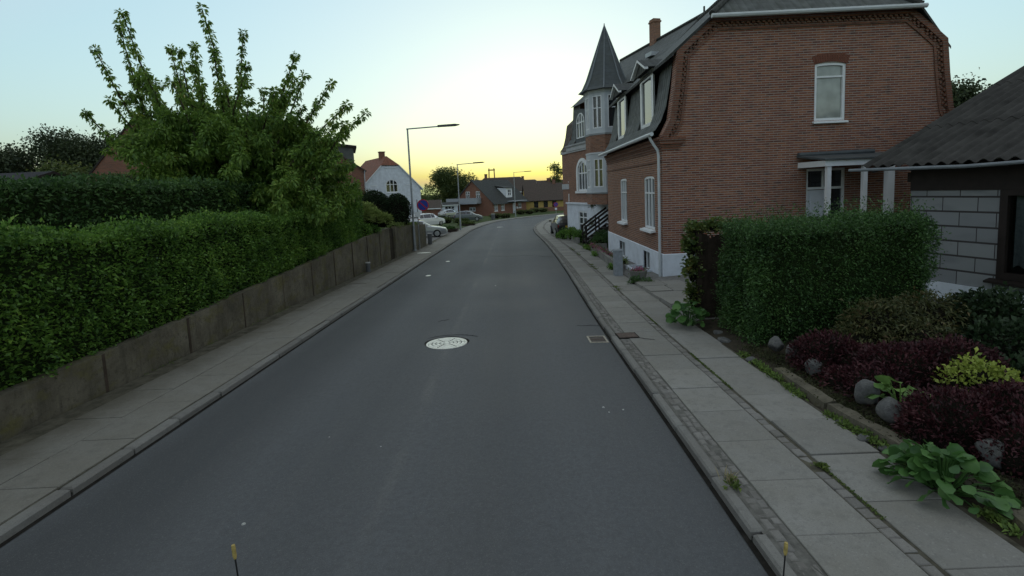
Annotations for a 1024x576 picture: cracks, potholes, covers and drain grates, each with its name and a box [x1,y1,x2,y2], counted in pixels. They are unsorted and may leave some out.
manhole cover [425,336,469,349]
